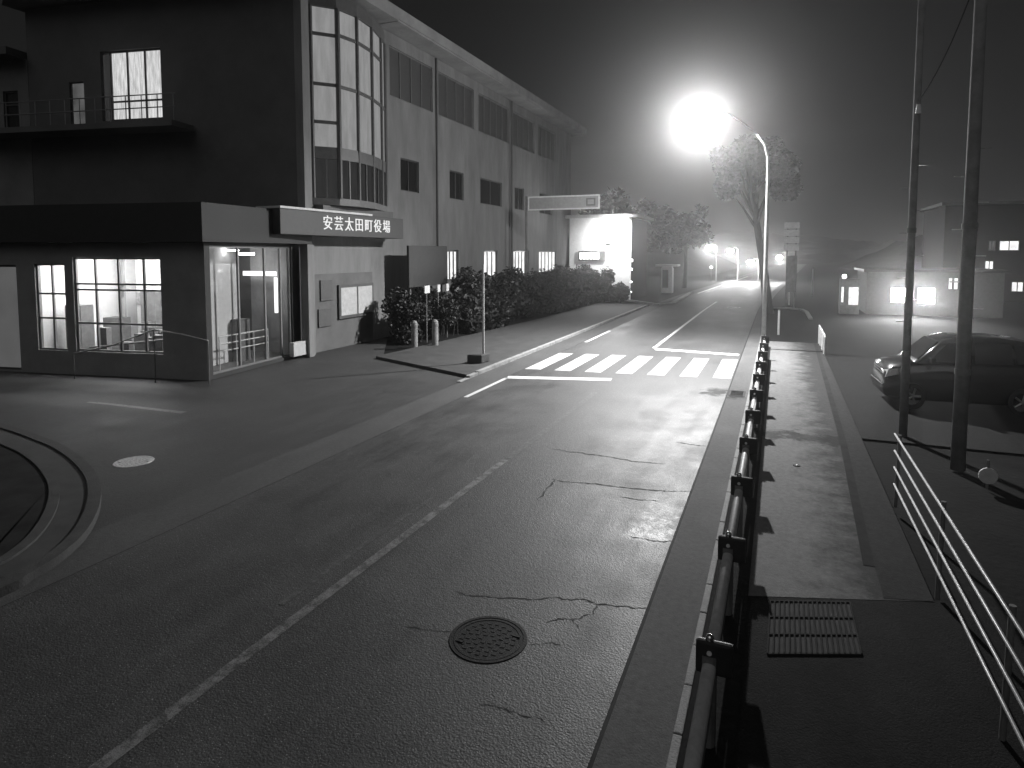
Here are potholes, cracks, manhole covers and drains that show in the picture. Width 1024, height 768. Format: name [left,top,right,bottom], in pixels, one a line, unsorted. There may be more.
manhole cover [113,456,154,468]
crack [482,704,547,723]
manhole cover [448,616,528,664]
drain grate [767,600,862,655]
crack [456,591,646,627]
crack [537,479,692,501]
